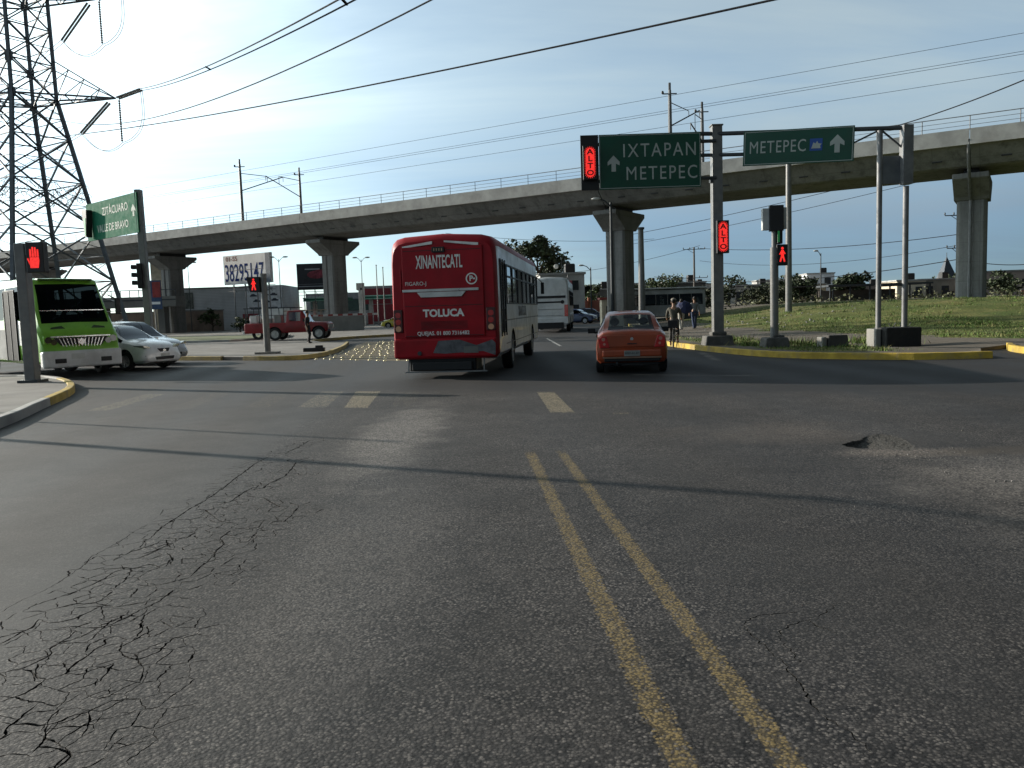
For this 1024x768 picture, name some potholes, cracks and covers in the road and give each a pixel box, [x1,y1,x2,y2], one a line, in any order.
pothole [842,434,914,451]
crack [0,438,324,768]
crack [744,604,871,752]
